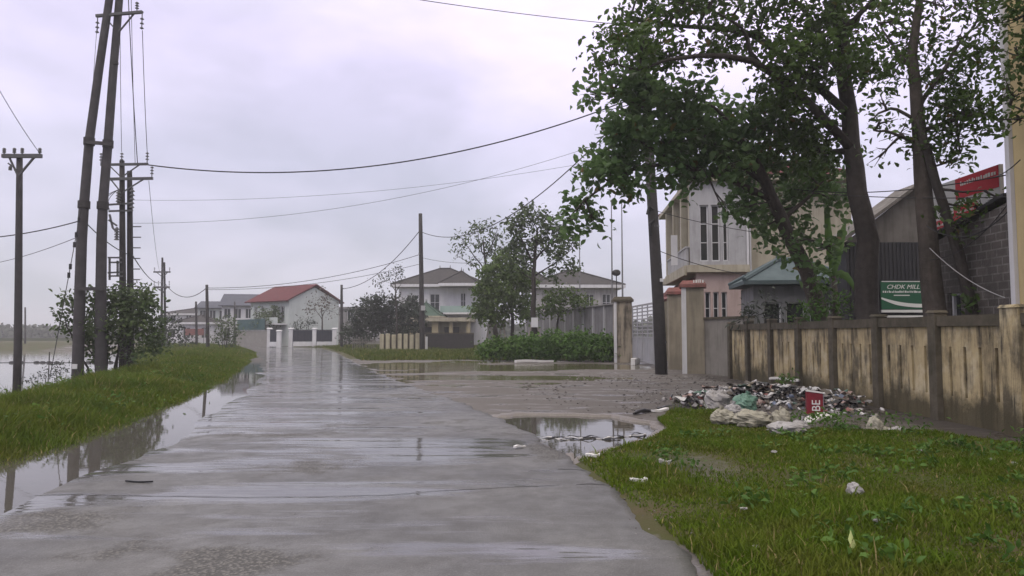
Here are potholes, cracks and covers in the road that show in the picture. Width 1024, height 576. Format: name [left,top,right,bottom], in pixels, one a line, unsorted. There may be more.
pothole [492,412,666,464]
